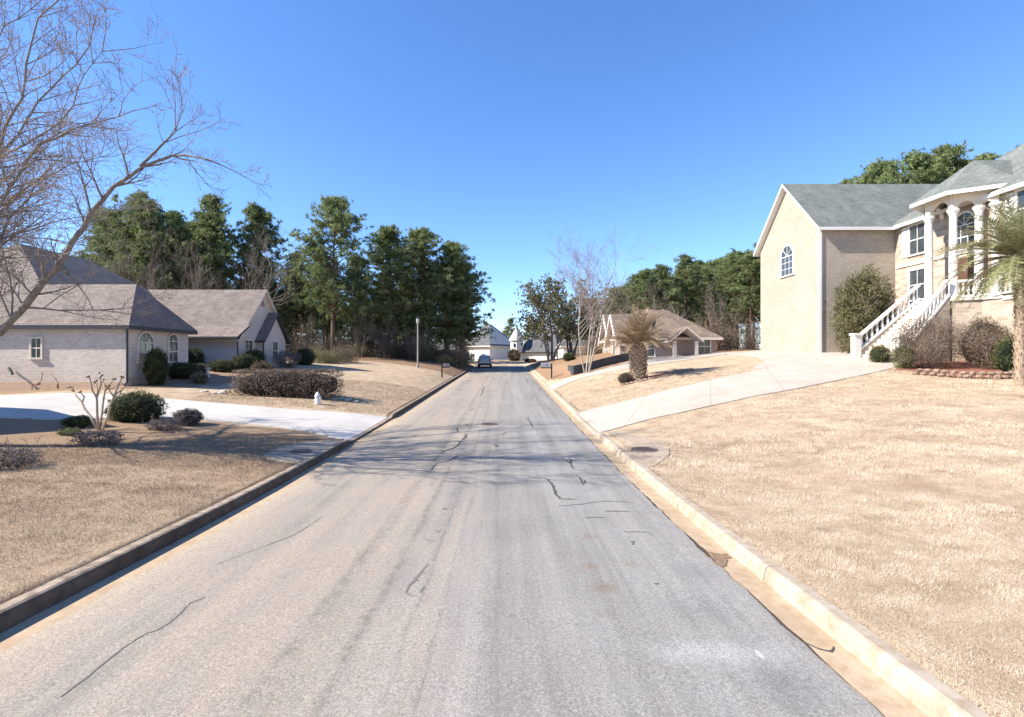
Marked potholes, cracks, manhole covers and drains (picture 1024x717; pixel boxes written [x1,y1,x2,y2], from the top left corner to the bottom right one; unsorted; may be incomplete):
crack [531,458,629,518]
crack [431,388,484,470]
crack [405,565,427,596]
crack [59,597,204,697]
